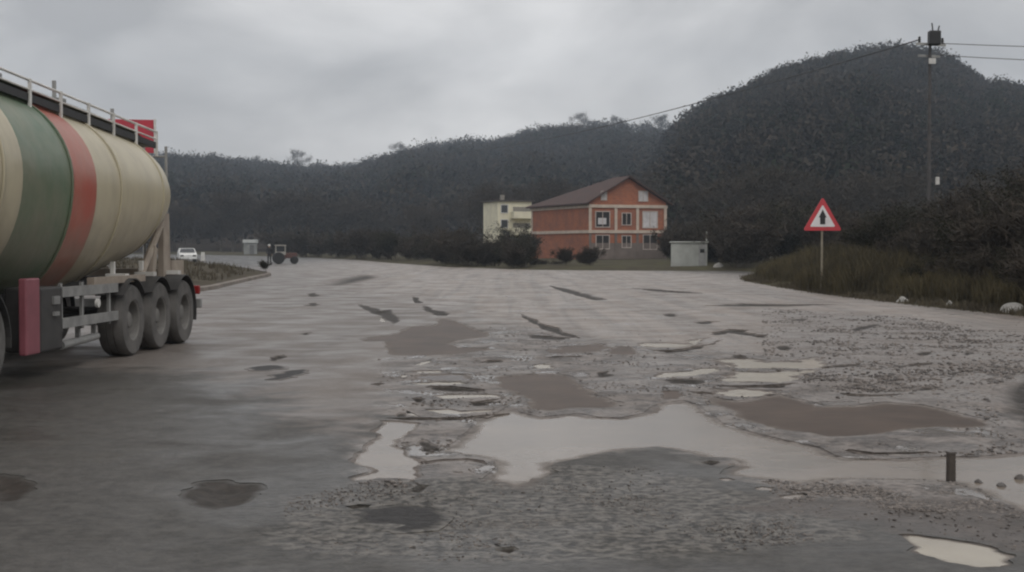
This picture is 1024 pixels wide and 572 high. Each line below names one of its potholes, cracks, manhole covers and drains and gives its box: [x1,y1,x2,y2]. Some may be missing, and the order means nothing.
pothole [438,400,1024,512]
pothole [491,373,624,411]
pothole [704,393,997,437]
pothole [348,420,427,481]
pothole [417,440,441,452]
pothole [178,479,268,510]
pothole [357,303,401,324]
pothole [359,318,493,356]
pothole [0,473,37,504]
